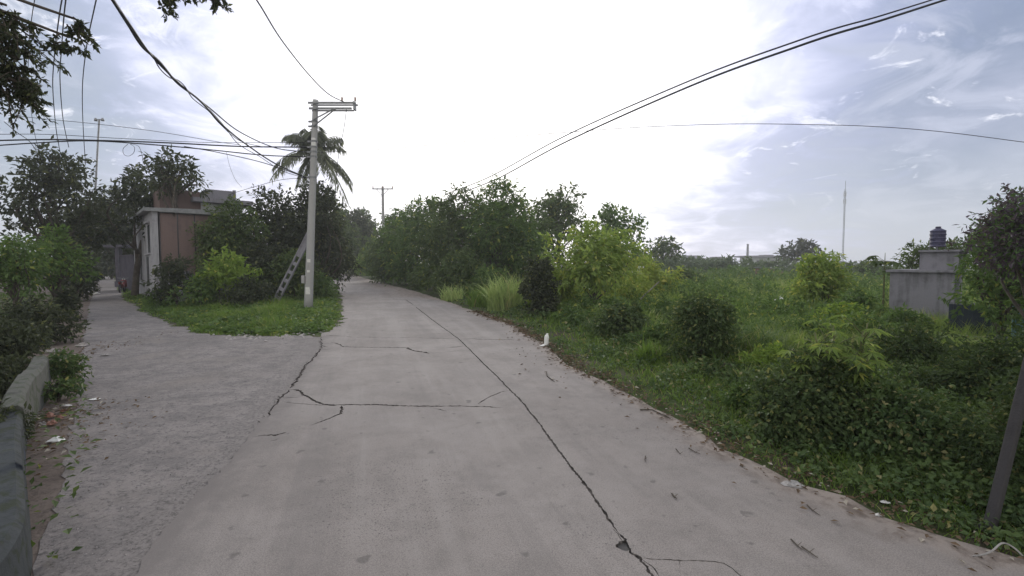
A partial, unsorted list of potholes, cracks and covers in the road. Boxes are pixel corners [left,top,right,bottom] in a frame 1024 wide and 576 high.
crack [268,338,504,425]
